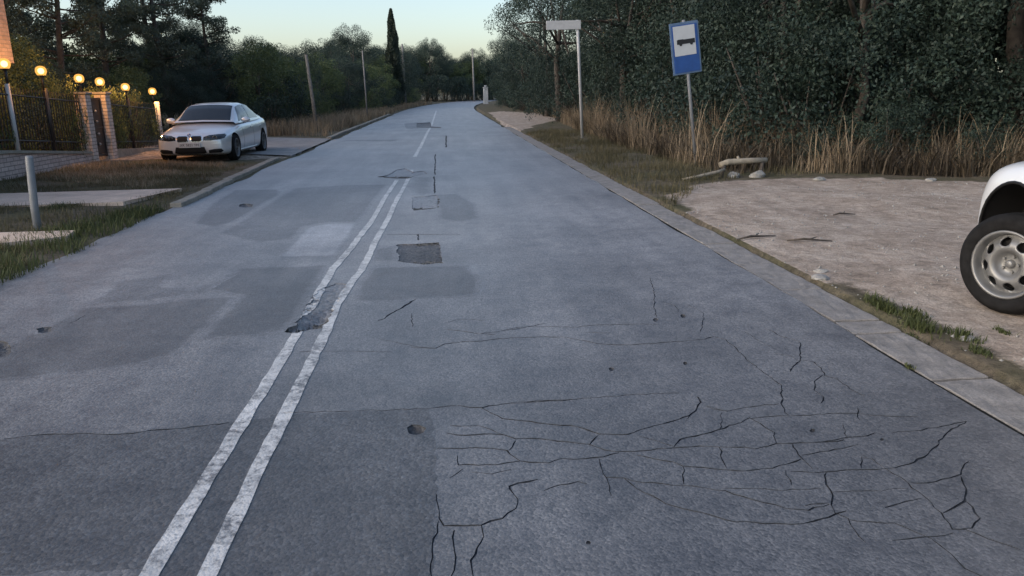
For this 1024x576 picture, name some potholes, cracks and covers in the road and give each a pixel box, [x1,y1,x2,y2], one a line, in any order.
crack [650,278,704,332]
pothole [407,424,426,435]
crack [293,319,1021,576]
pothole [285,283,346,333]
pothole [379,169,426,179]
